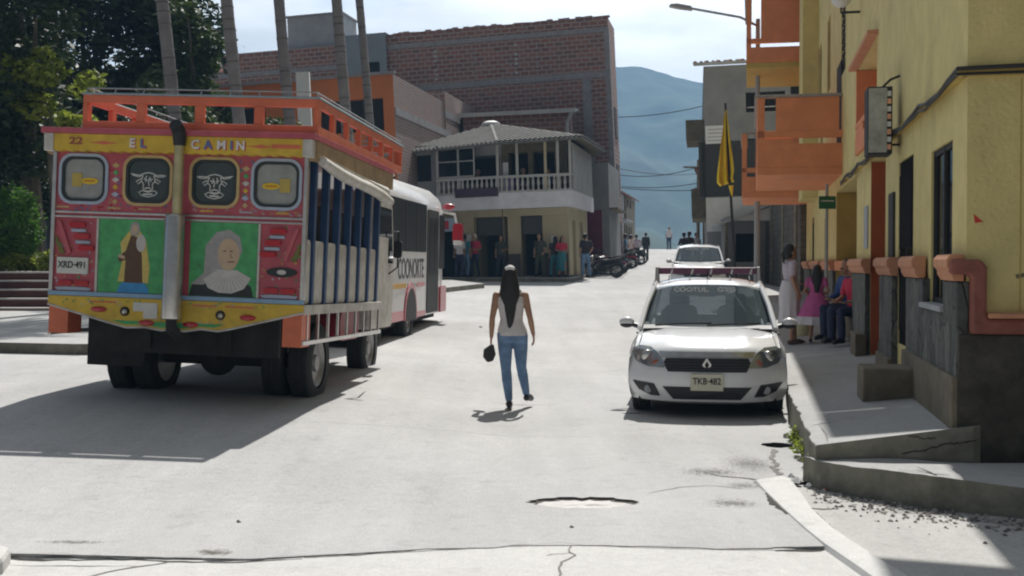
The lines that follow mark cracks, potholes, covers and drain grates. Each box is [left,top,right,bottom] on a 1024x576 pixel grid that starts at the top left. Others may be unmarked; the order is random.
crack [549,545,576,576]
pothole [526,497,639,508]
crack [649,449,788,514]
